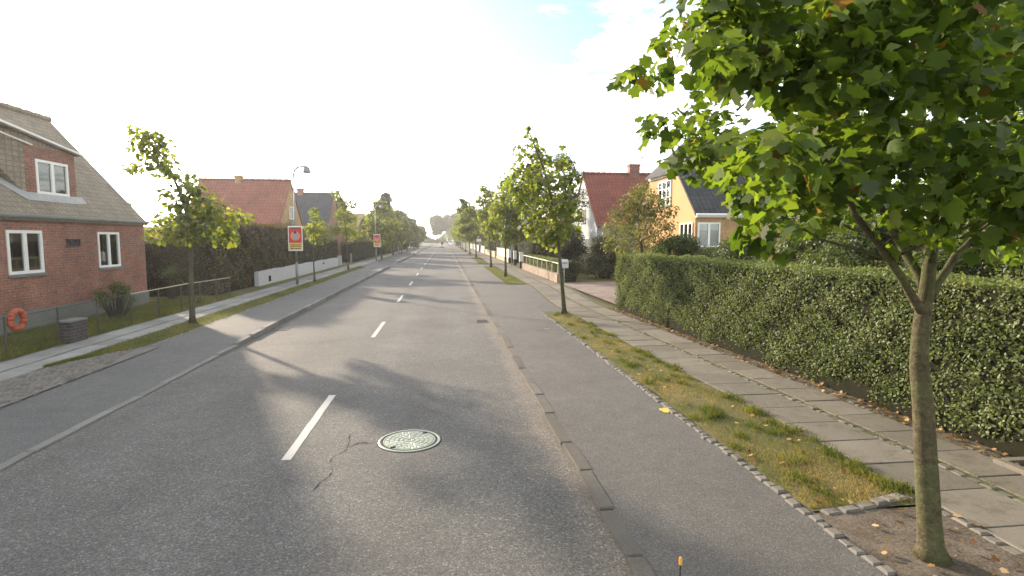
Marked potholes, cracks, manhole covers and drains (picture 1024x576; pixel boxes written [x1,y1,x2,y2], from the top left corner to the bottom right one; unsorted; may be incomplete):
manhole cover [377,430,442,453]
